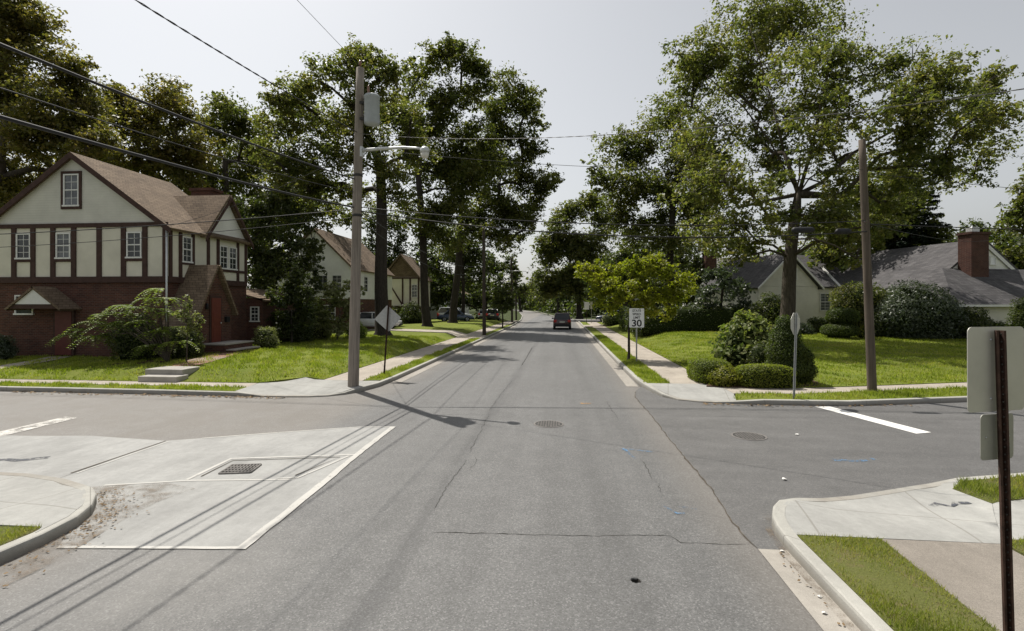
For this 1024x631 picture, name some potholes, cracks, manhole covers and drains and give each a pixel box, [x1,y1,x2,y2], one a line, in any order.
crack [449,532,716,544]
manhole cover [534,420,564,428]
drain grate [218,463,262,475]
manhole cover [731,432,768,441]
